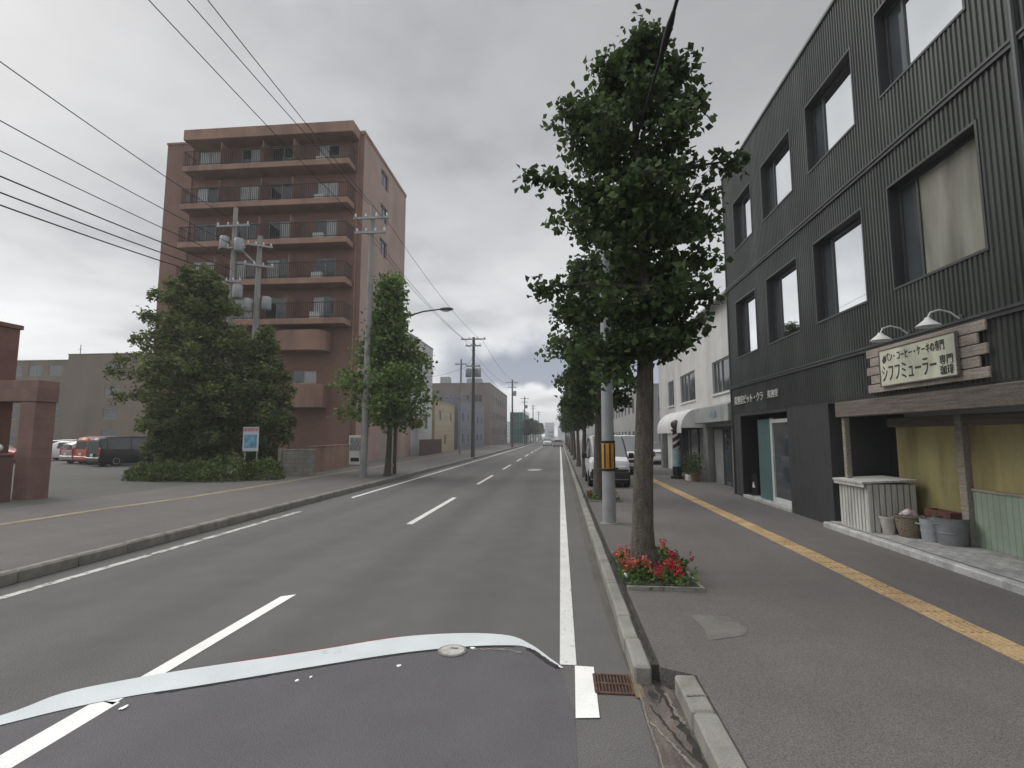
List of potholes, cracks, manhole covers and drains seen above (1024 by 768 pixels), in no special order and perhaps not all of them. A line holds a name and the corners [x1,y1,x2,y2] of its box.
drain grate [592,673,636,696]
crack [649,680,708,768]
